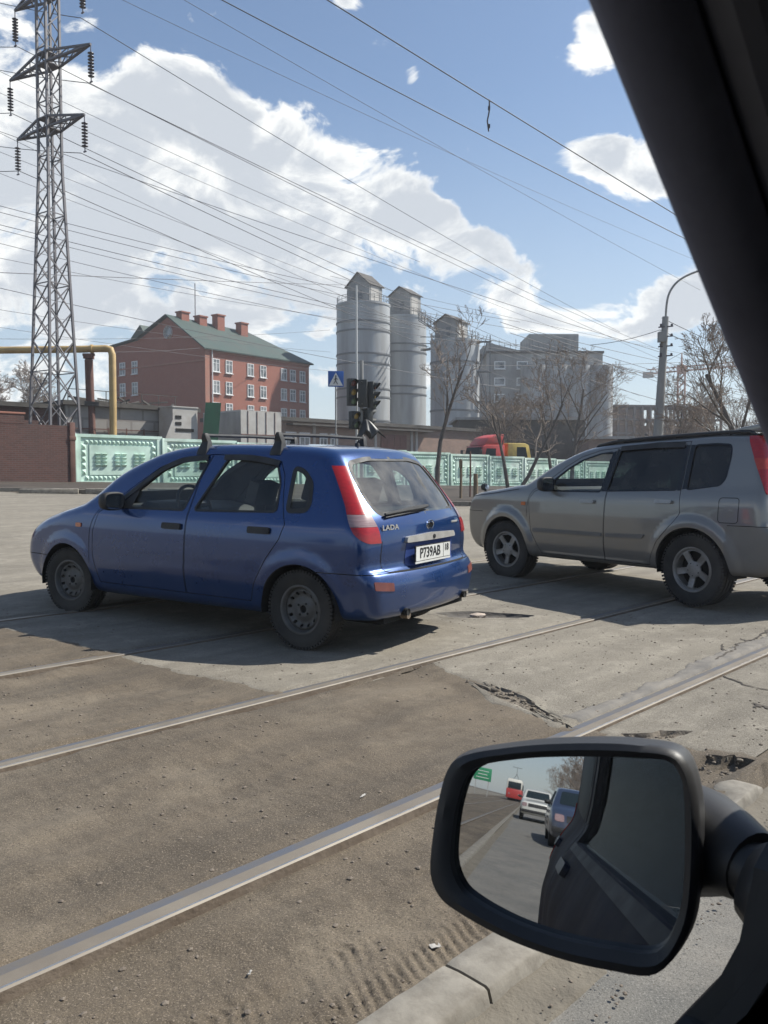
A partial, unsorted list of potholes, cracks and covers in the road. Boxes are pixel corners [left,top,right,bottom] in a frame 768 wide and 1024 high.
pothole [692,749,768,790]
crack [715,629,768,709]
pothole [606,727,708,745]
pothole [466,680,573,728]
